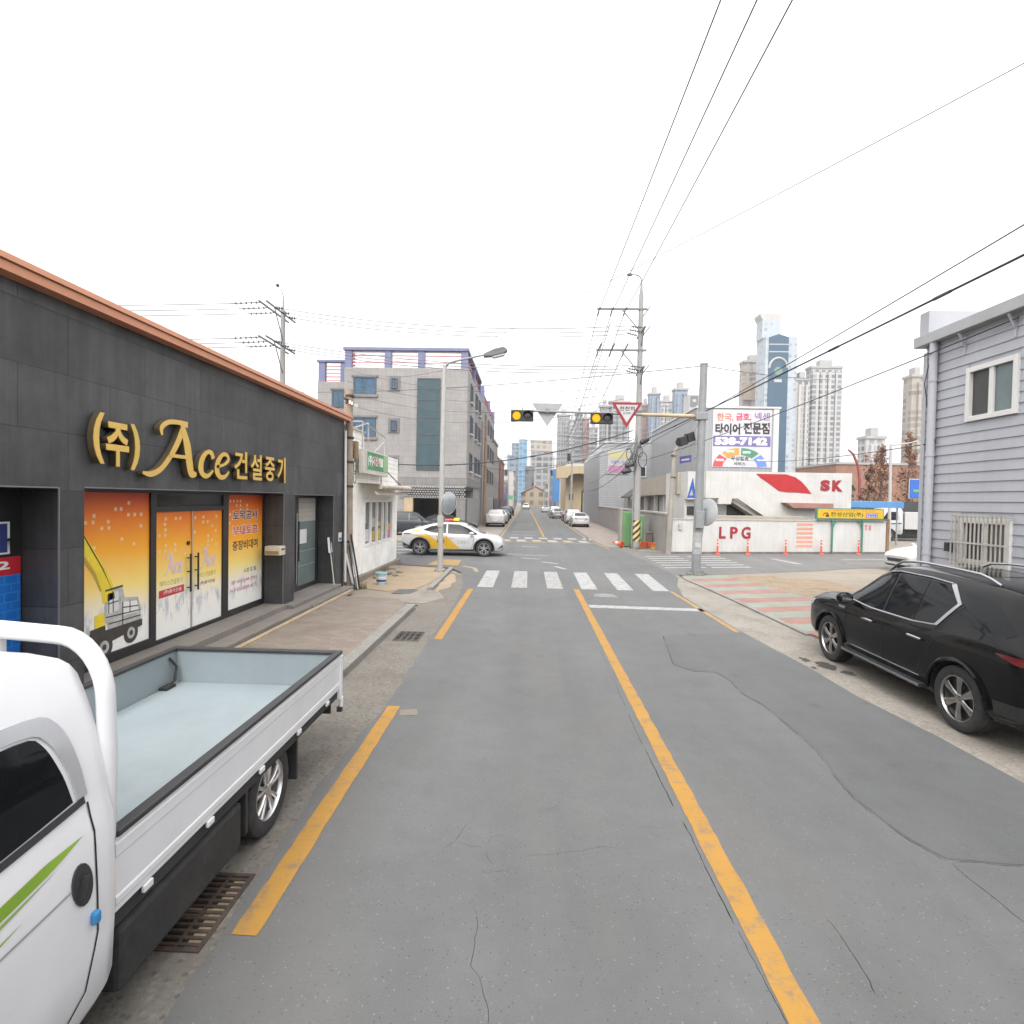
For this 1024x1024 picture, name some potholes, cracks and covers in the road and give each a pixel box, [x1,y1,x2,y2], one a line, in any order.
crack [470,911,489,1023]
crack [827,919,876,995]
crack [663,637,1024,922]
